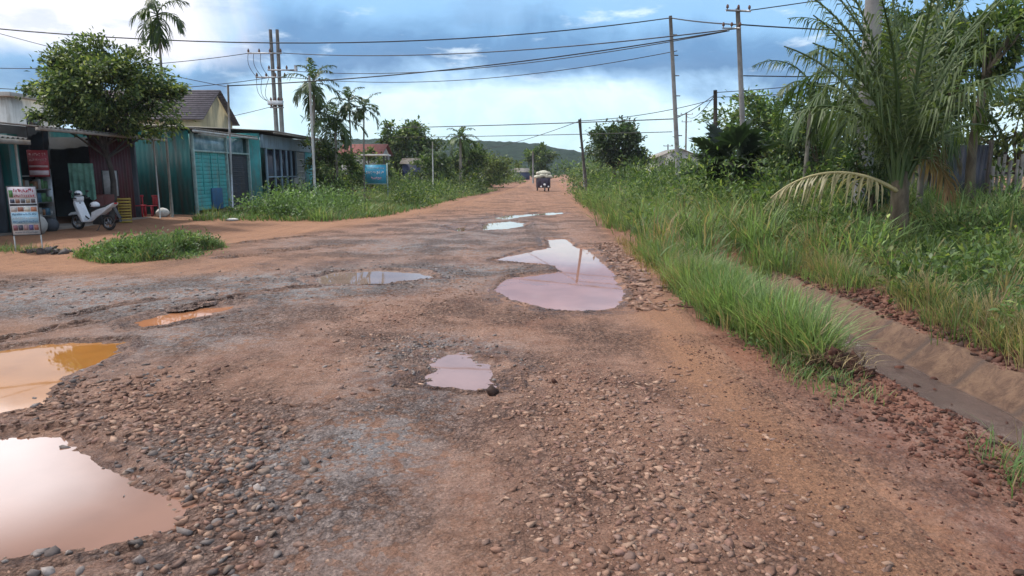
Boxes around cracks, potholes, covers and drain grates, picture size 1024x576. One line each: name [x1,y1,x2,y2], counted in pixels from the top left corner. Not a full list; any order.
pothole [0,335,143,417]
pothole [296,267,447,286]
pothole [474,220,535,231]
pothole [108,298,260,333]
pothole [486,237,635,314]
pothole [480,212,568,220]
pothole [384,345,529,395]
pothole [0,418,226,576]
